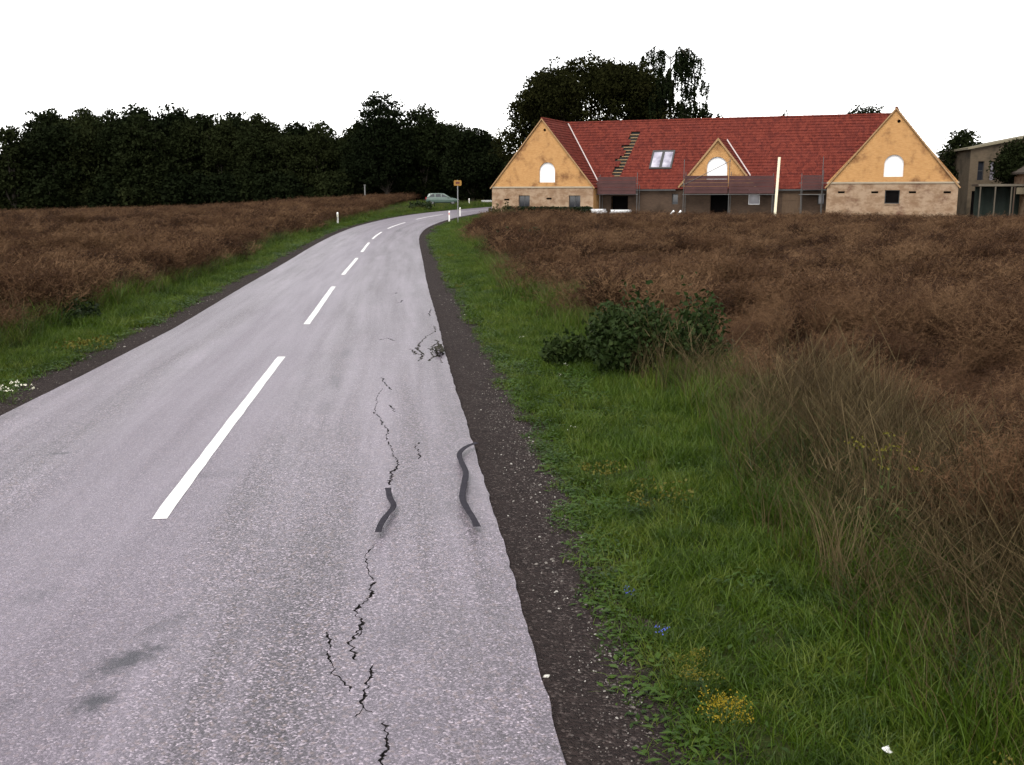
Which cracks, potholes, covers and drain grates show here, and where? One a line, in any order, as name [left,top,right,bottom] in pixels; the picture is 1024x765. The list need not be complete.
crack [326,378,421,765]
crack [411,310,443,363]
